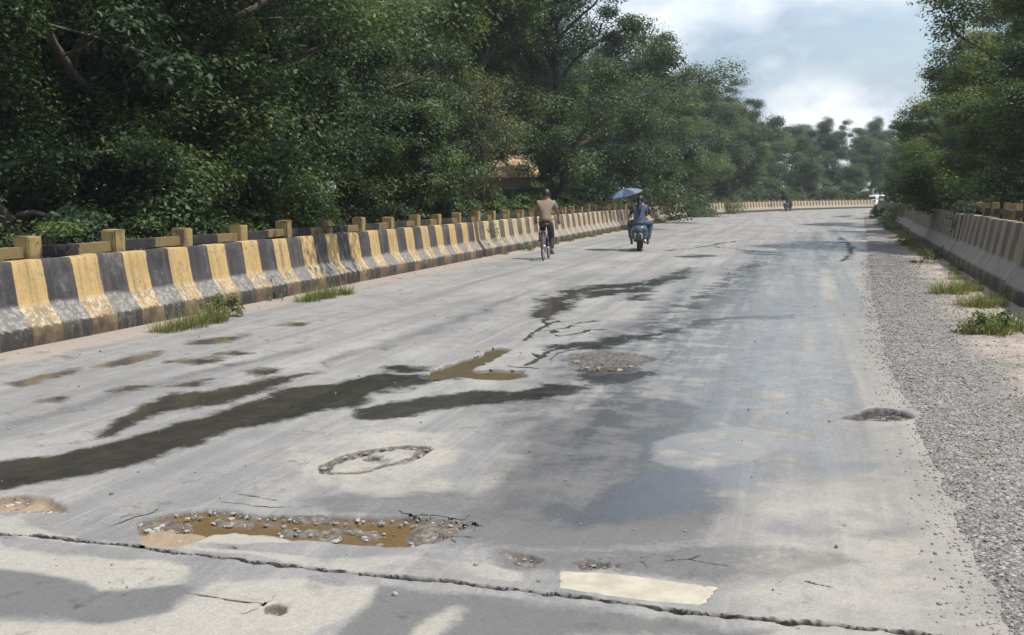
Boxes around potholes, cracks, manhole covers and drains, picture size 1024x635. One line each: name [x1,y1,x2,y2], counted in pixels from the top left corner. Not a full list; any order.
pothole [402,345,546,385]
pothole [471,542,563,580]
crack [0,507,990,635]
pothole [108,502,485,557]
pothole [551,348,672,375]
pothole [825,405,922,426]
crack [505,317,624,369]
pothole [0,488,96,522]
